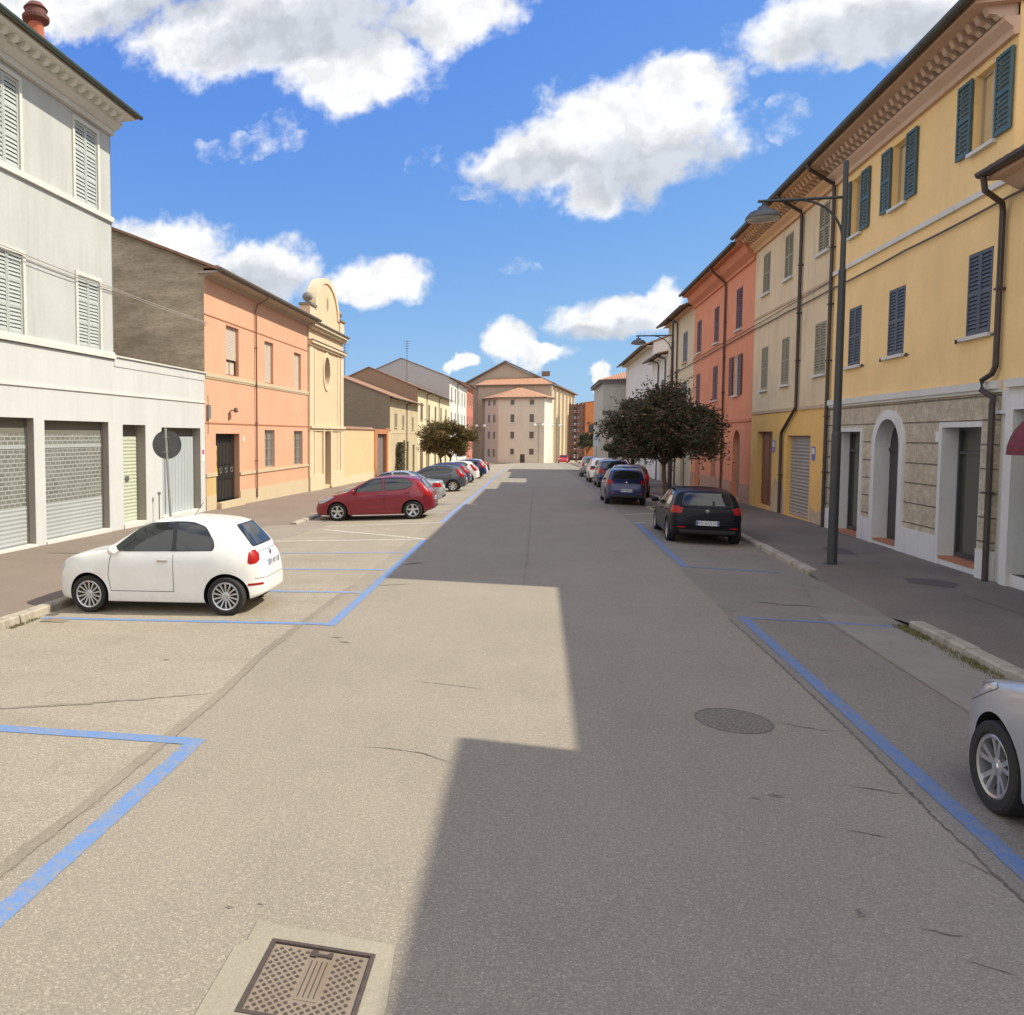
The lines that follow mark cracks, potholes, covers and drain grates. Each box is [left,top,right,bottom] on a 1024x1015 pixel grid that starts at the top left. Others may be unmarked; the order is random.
manhole cover [195,920,396,1015]
manhole cover [694,708,774,734]
crack [761,581,821,608]
